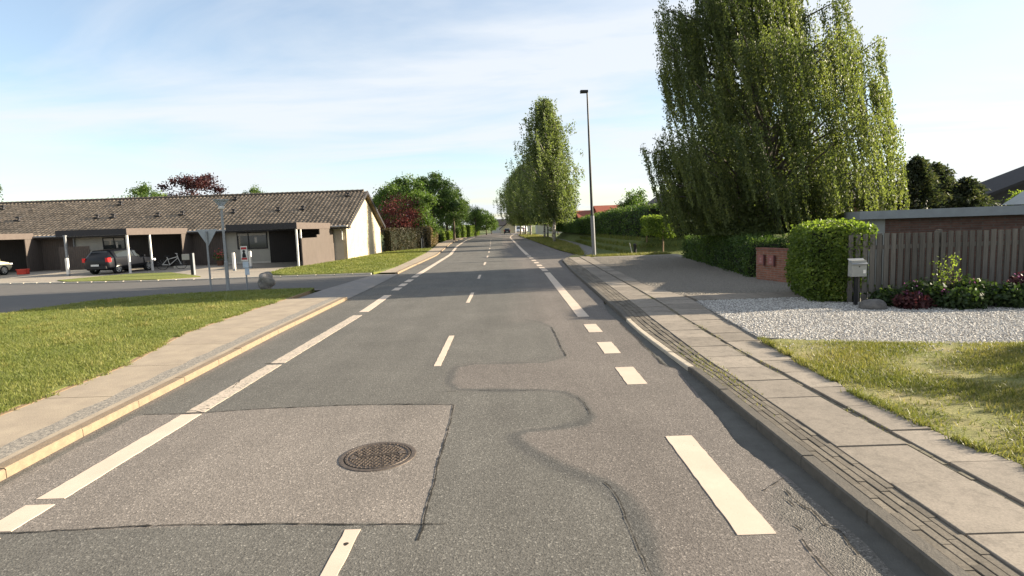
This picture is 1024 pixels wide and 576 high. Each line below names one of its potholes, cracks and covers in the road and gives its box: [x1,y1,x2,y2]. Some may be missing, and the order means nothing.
crack [764,477,860,554]
manhole cover [339,442,416,472]
crack [604,482,652,576]
